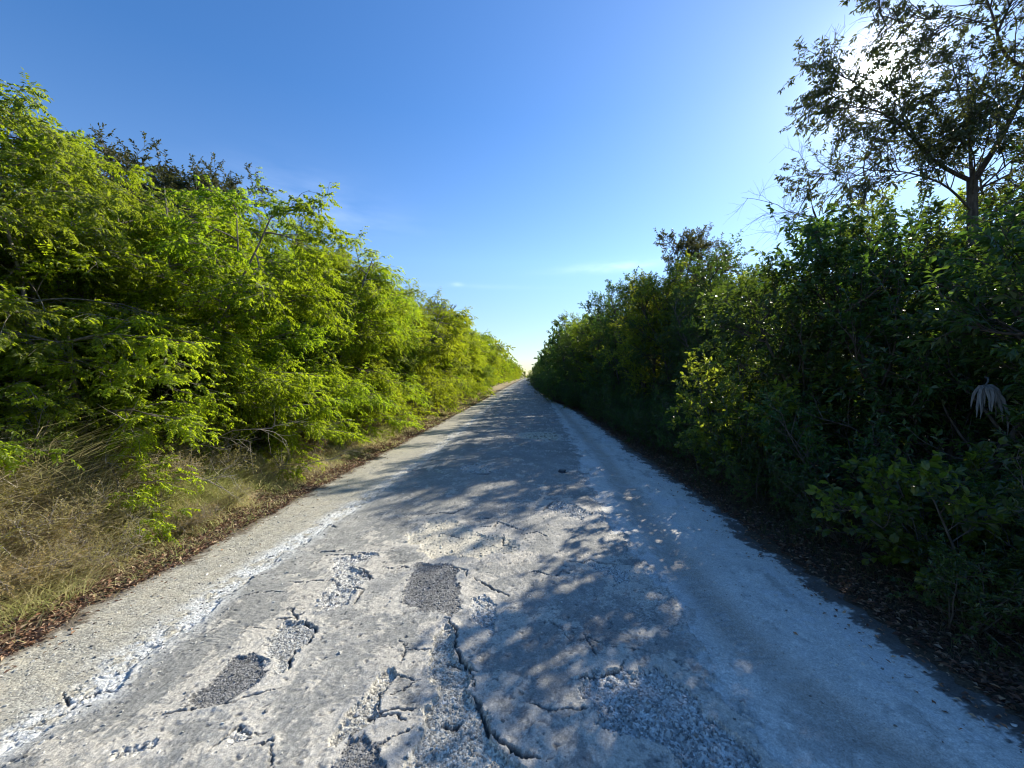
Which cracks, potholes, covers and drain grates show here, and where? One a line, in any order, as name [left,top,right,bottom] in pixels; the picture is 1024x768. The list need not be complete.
pothole [179,652,271,710]
pothole [329,665,398,747]
pothole [314,552,379,612]
crack [523,701,592,711]
pothole [331,731,388,768]
crack [156,550,411,714]
pothole [400,562,464,617]
crack [0,686,130,741]
